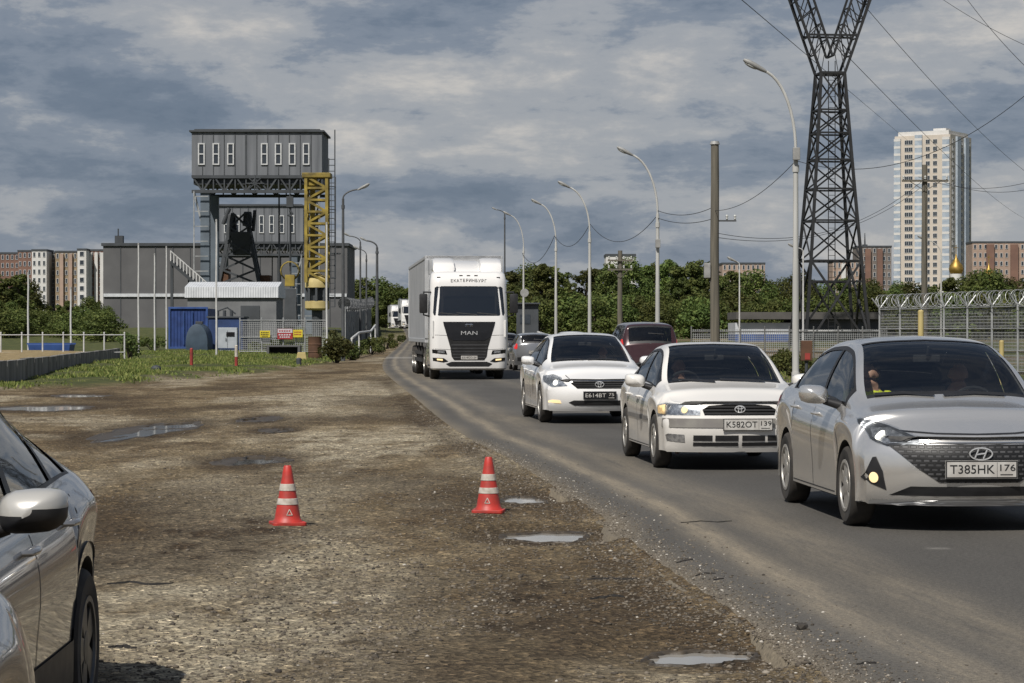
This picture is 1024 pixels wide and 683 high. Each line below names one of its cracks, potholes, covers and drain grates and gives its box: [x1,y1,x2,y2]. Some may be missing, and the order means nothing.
pothole [640,649,761,667]
pothole [86,421,204,443]
pothole [209,455,294,466]
pothole [500,496,549,505]
pothole [498,531,594,543]
